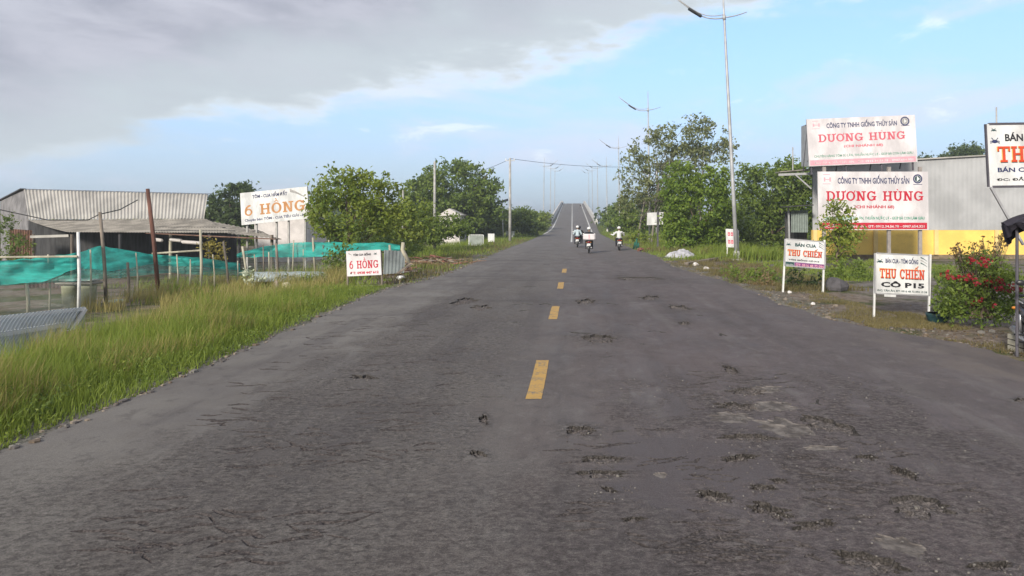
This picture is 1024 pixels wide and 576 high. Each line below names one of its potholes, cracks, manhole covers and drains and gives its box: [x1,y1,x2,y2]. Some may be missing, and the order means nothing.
pothole [800,414,861,436]
pothole [889,495,959,521]
pothole [829,549,912,574]
pothole [720,454,760,463]
pothole [581,334,618,343]
pothole [791,518,837,531]
pothole [886,465,919,481]
pothole [566,426,597,435]
pothole [745,501,794,521]
pothole [574,470,630,478]
pothole [449,297,479,305]
pothole [695,489,734,503]
